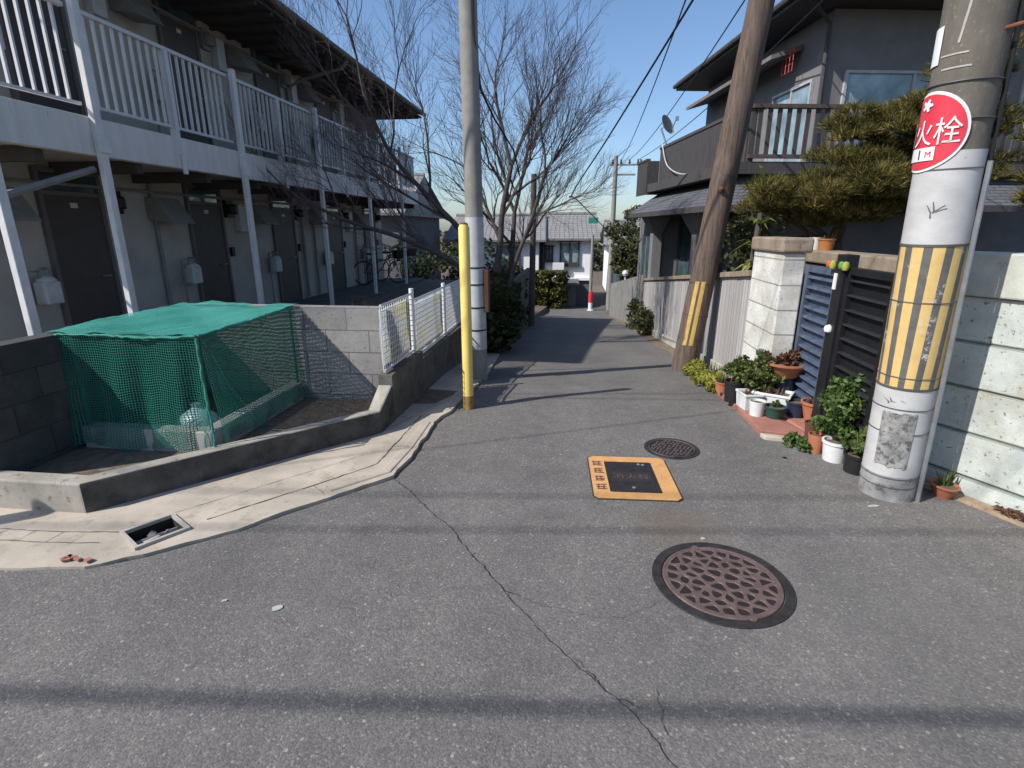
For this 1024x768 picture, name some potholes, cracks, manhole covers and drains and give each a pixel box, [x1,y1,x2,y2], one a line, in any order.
manhole cover [644,438,700,460]
manhole cover [652,542,797,629]
drain grate [120,513,191,551]
crack [395,479,677,768]
